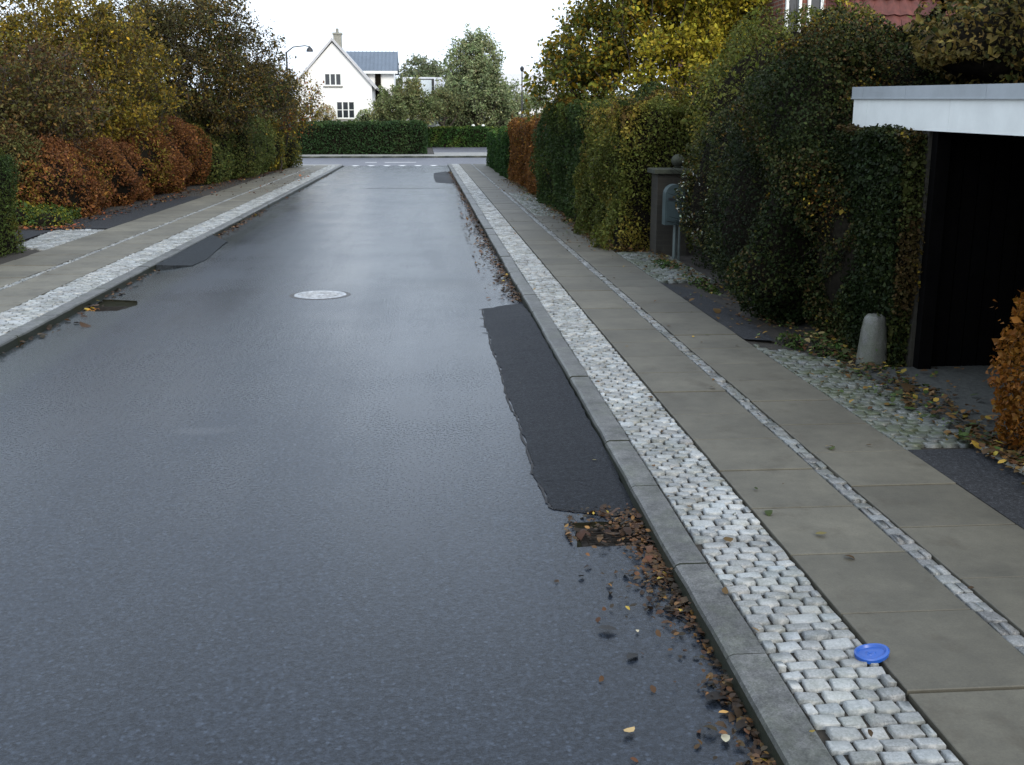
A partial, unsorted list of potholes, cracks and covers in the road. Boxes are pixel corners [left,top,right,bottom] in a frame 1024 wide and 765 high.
manhole cover [289,290,351,300]
